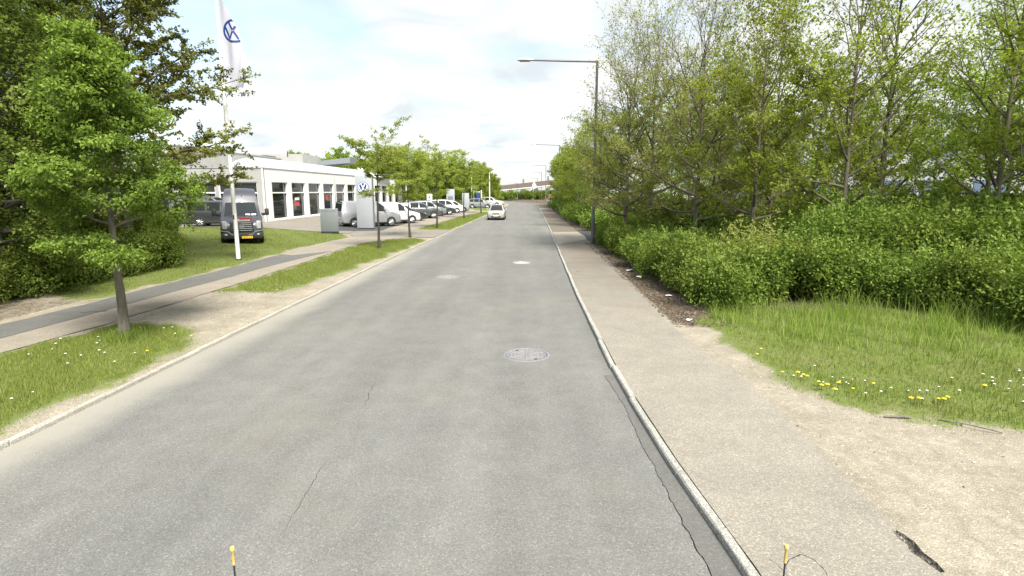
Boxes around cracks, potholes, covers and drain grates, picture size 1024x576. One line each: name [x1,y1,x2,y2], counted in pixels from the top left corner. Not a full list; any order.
manhole cover [503,348,550,362]
crack [251,385,373,576]
crack [606,379,711,575]
